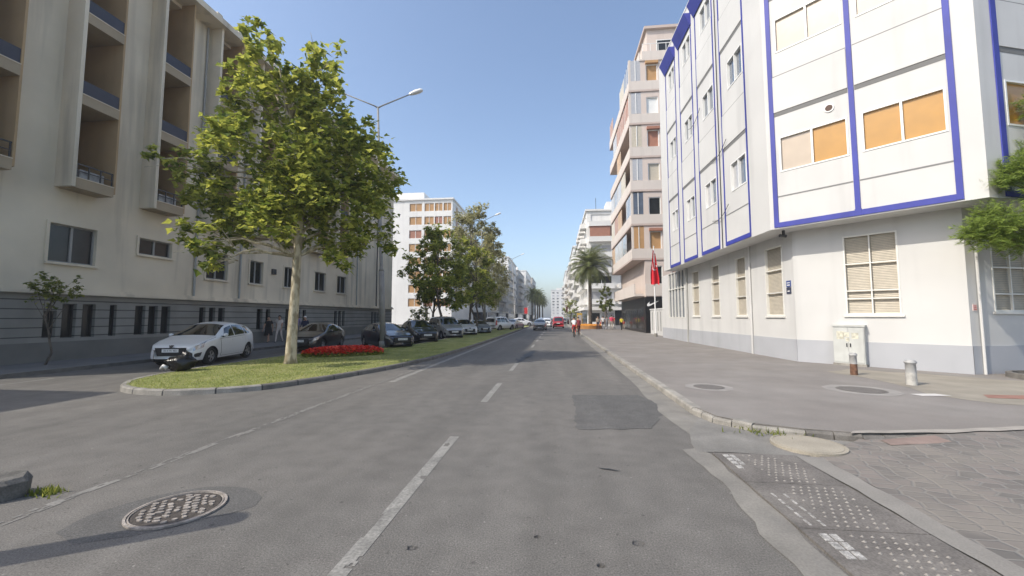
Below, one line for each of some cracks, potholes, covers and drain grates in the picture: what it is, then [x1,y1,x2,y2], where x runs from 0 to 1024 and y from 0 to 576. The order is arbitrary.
manhole cover [770,434,850,457]
manhole cover [821,385,904,396]
manhole cover [122,490,228,531]
manhole cover [685,383,734,391]
